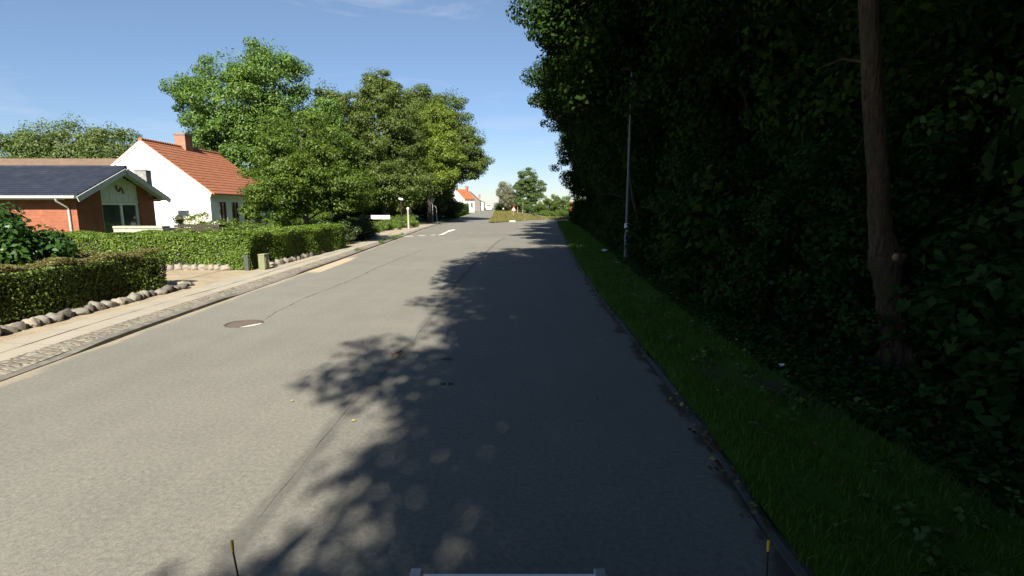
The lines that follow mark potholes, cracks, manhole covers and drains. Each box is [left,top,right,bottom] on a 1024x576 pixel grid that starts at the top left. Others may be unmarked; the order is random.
manhole cover [224,320,264,328]
